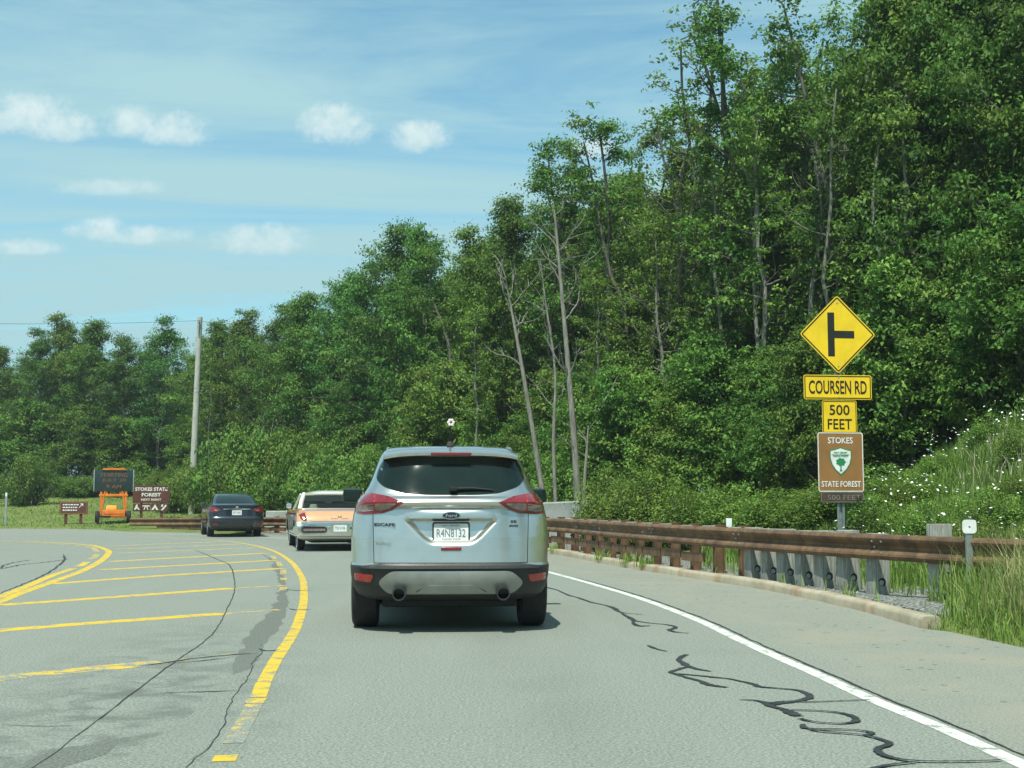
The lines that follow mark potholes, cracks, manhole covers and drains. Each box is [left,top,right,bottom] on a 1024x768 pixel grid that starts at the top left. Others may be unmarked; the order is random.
crack [0,554,67,594]
crack [140,648,279,768]
